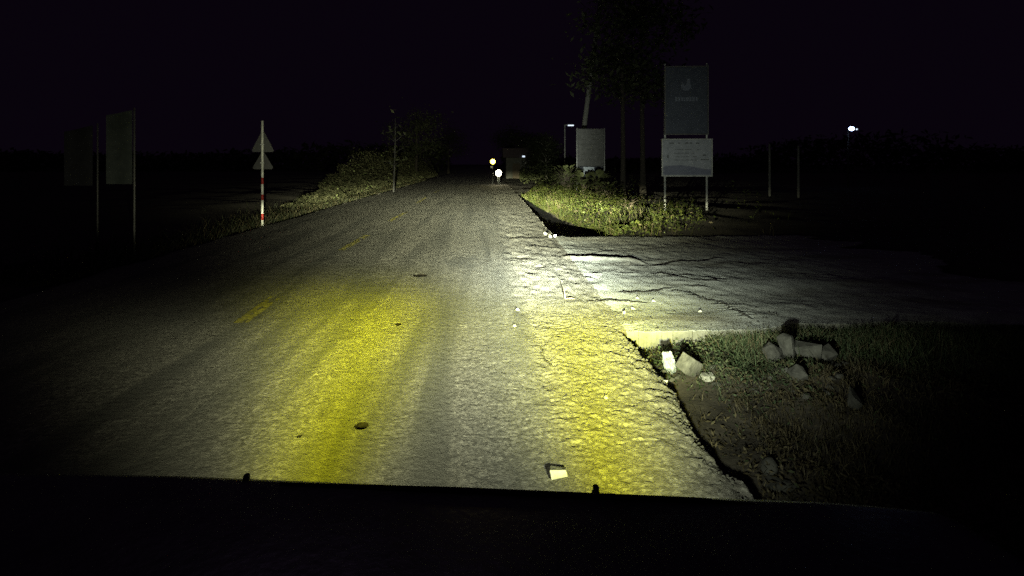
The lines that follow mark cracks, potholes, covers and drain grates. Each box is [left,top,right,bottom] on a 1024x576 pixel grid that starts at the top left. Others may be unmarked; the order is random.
crack [595,257,750,318]
